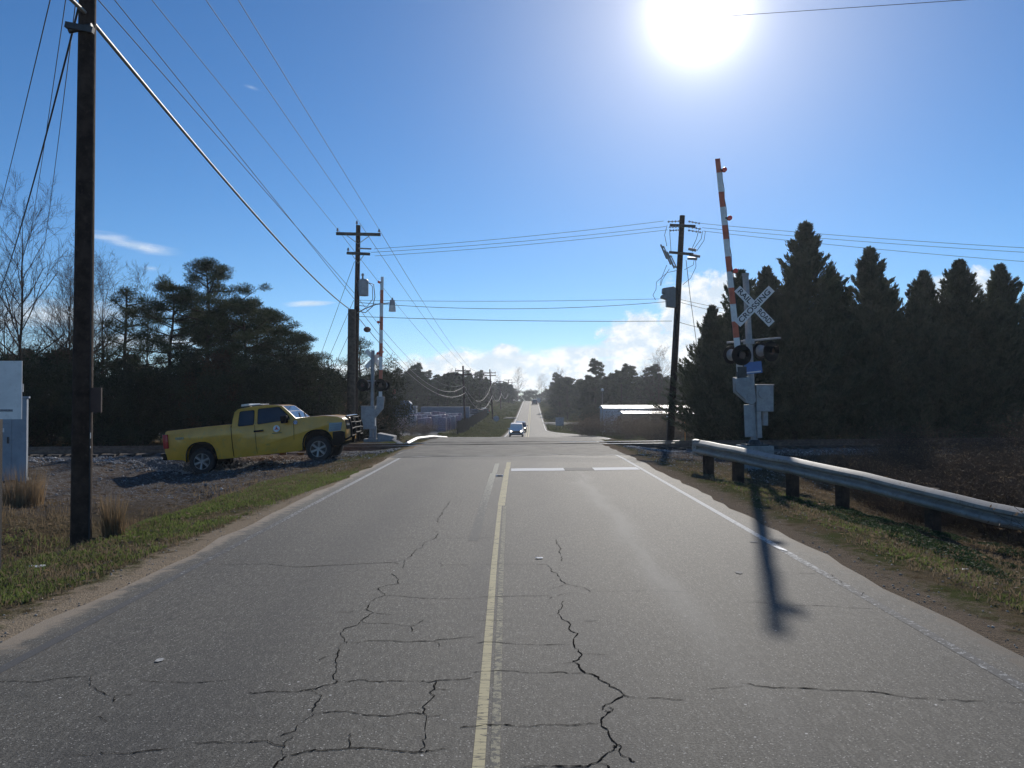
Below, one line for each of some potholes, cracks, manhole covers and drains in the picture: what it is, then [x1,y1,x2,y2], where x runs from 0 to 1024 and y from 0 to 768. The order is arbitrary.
crack [711,683,1020,703]
crack [204,504,561,768]
crack [22,676,131,722]
crack [462,601,683,768]
